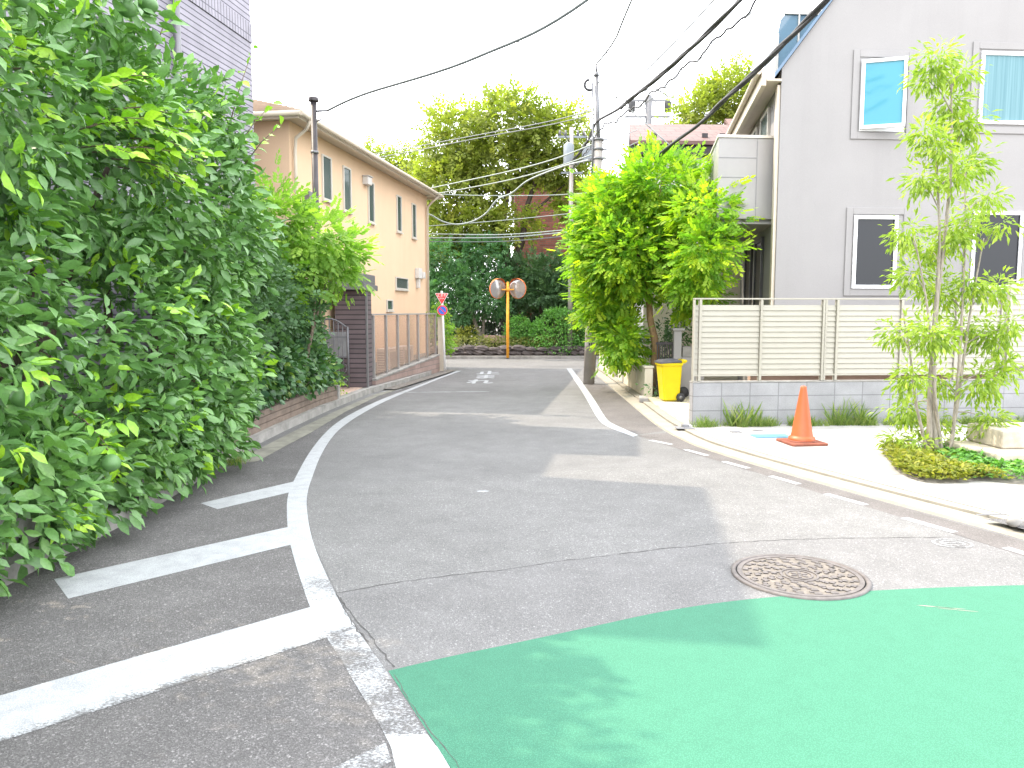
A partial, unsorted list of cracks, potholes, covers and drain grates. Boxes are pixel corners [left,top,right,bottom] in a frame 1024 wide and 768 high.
manhole cover [731,554,872,601]
